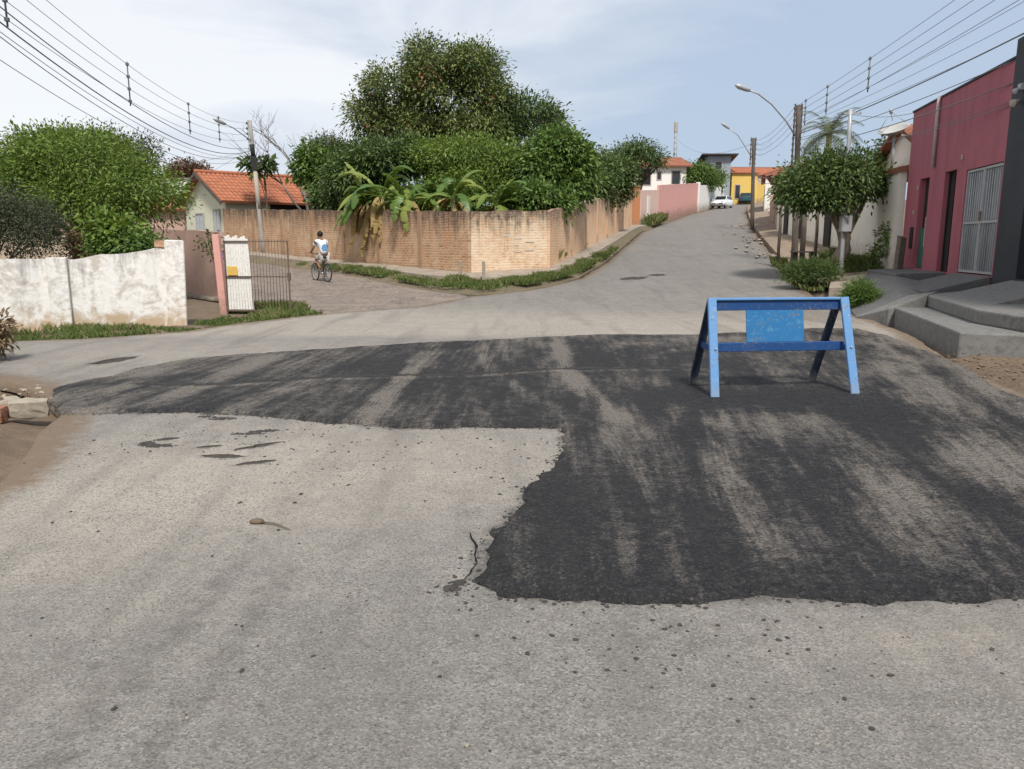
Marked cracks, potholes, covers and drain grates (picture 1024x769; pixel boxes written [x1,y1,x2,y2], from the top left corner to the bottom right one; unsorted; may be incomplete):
crack [444,533,485,593]
pothole [234,441,283,450]
